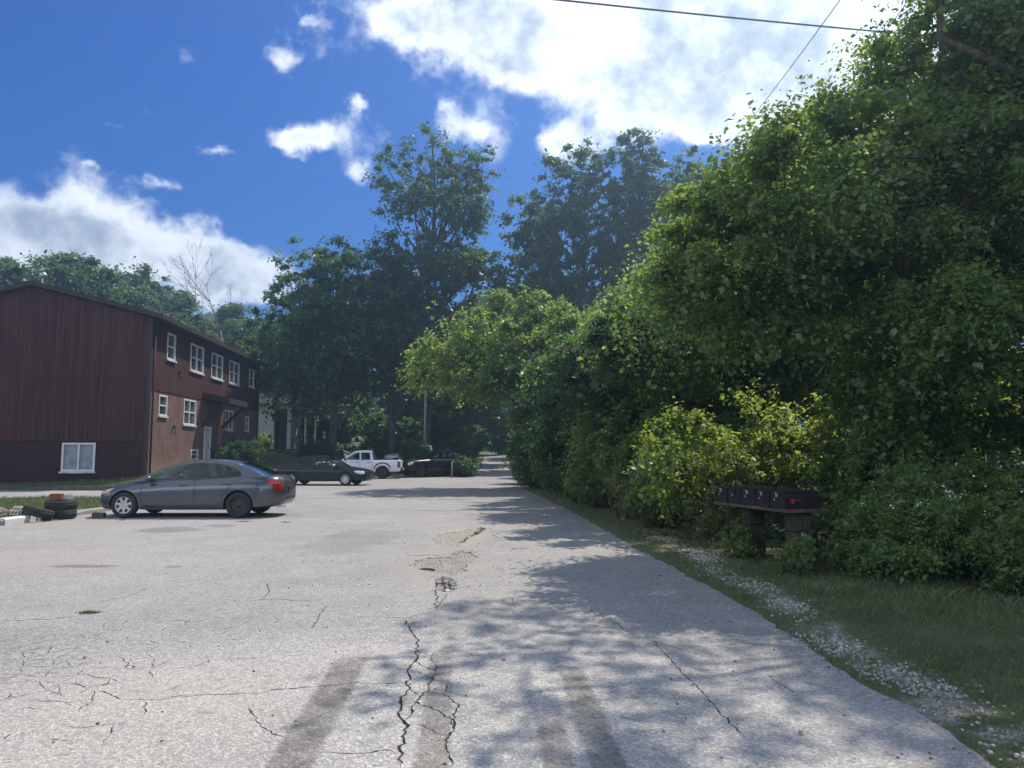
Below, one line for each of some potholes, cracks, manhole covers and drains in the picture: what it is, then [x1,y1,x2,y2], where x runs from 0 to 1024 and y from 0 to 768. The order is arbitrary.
pothole [434,576,458,593]
pothole [431,528,481,547]
crack [0,537,492,768]
crack [590,609,745,737]
pothole [413,551,480,576]
